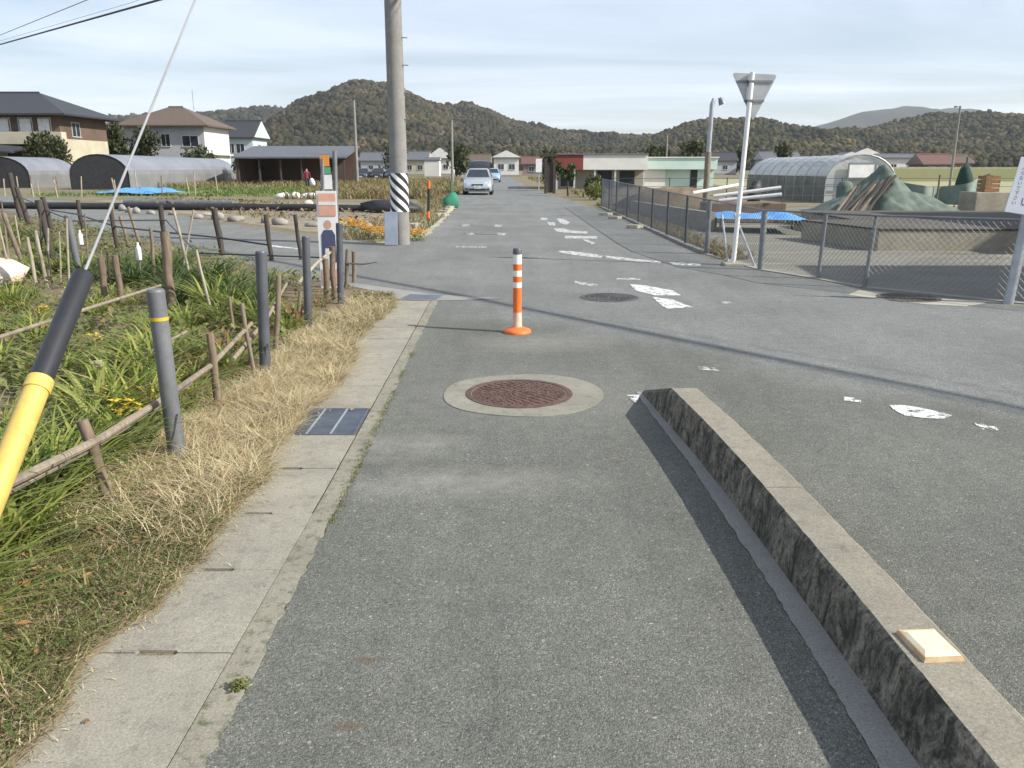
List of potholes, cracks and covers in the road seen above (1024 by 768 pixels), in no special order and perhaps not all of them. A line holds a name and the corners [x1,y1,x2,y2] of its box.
manhole cover [580,293,639,302]
manhole cover [849,290,984,306]
manhole cover [444,374,604,417]
drain grate [293,408,370,435]
